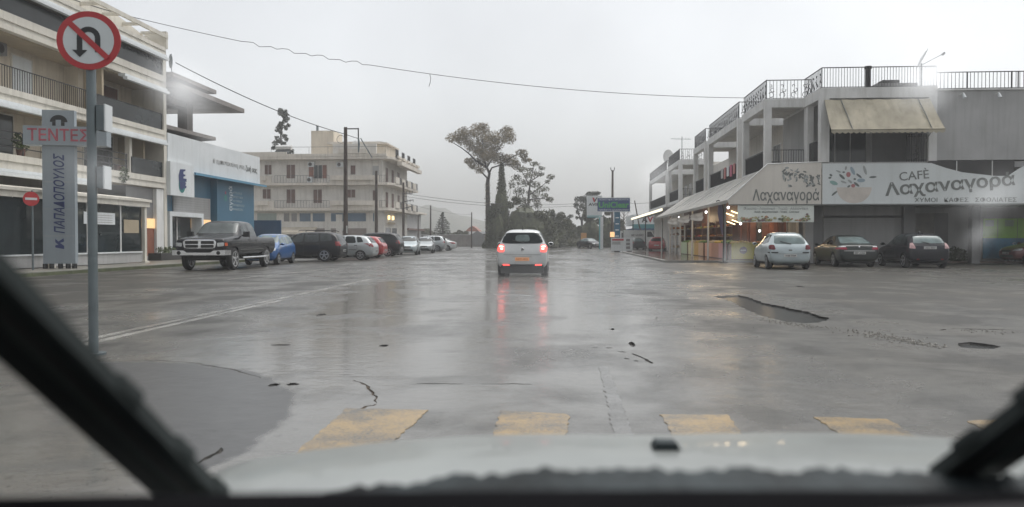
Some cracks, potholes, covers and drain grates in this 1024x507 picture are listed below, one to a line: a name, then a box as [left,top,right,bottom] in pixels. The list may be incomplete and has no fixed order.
crack [353,380,378,409]
pothole [715,295,829,323]
